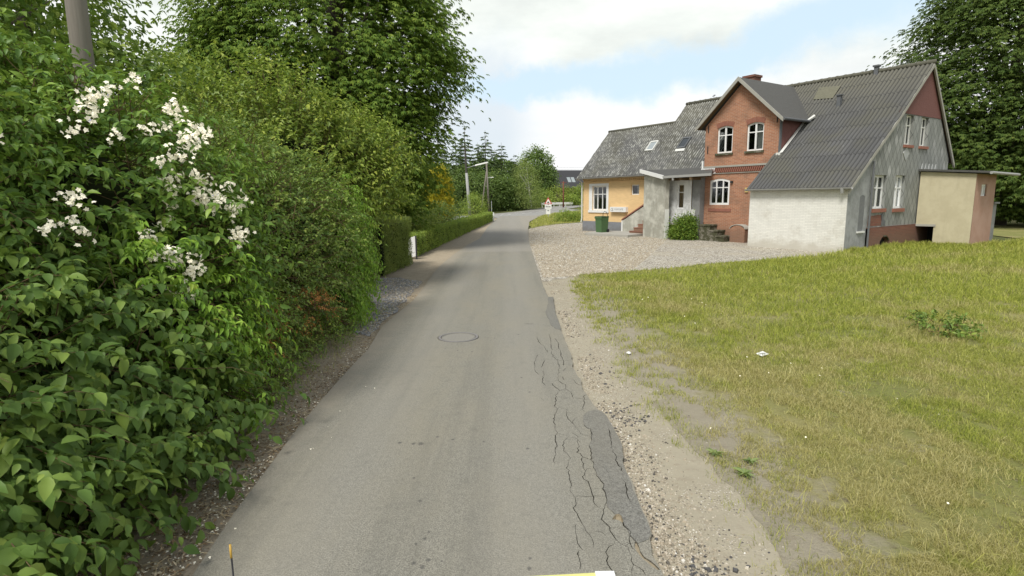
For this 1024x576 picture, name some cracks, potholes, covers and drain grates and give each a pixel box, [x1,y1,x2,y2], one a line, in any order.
crack [534,337,659,574]
manhole cover [438,332,479,342]
